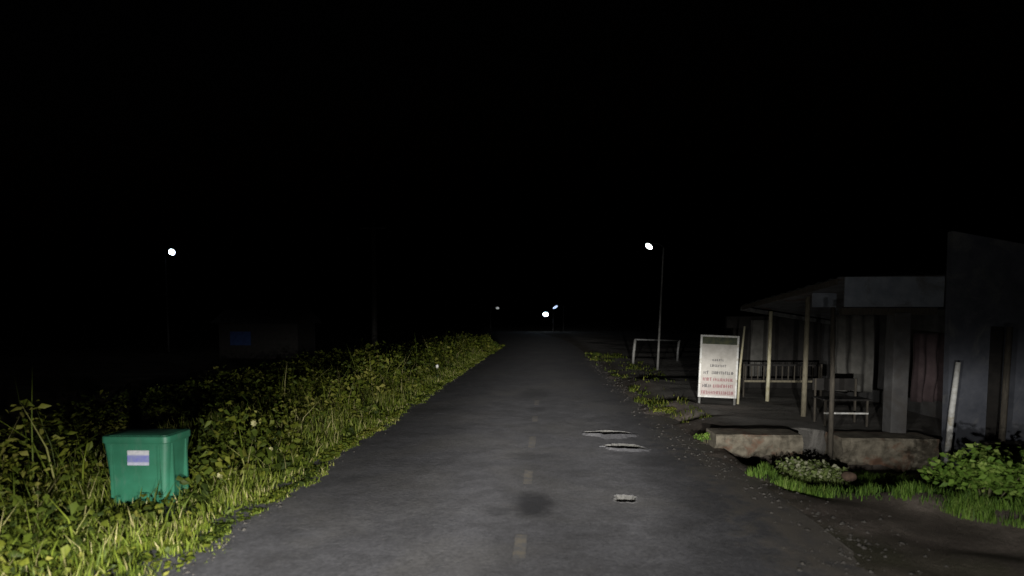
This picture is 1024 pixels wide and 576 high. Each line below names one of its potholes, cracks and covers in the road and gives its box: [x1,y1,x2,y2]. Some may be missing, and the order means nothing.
pothole [600,443,651,452]
pothole [613,494,638,504]
pothole [582,429,639,440]
